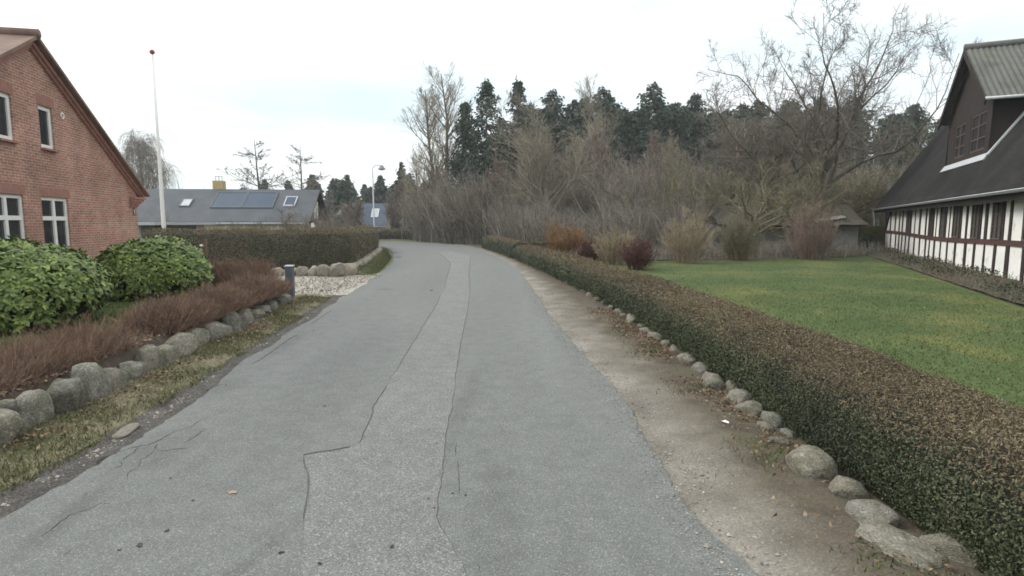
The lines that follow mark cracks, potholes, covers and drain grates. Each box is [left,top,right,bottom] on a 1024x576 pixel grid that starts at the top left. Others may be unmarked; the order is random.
crack [96,417,210,478]
crack [251,311,330,365]
crack [41,492,113,537]
